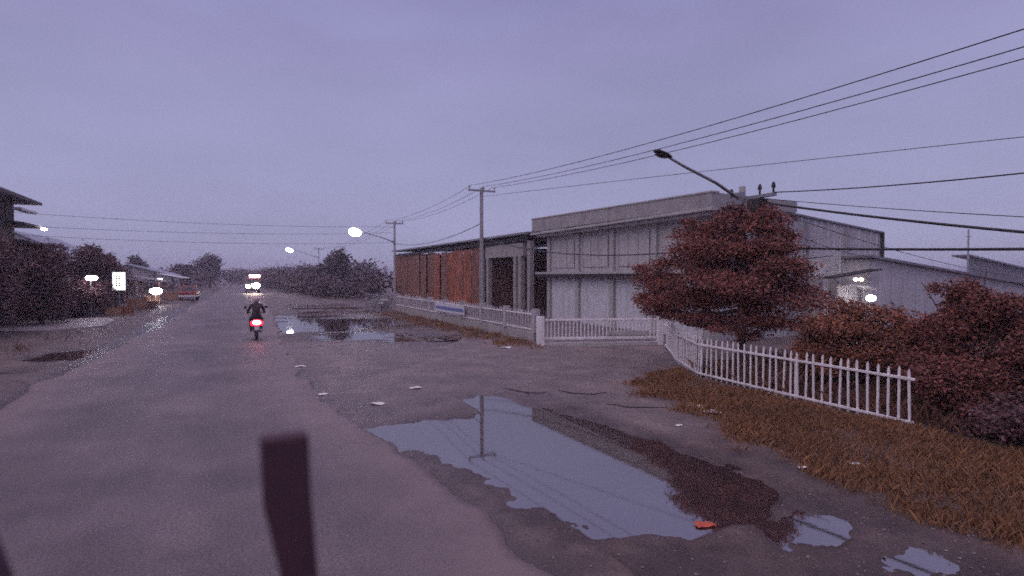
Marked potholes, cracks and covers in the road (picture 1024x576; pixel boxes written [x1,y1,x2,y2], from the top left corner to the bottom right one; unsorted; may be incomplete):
crack [504,388,657,408]
pothole [20,342,127,363]
